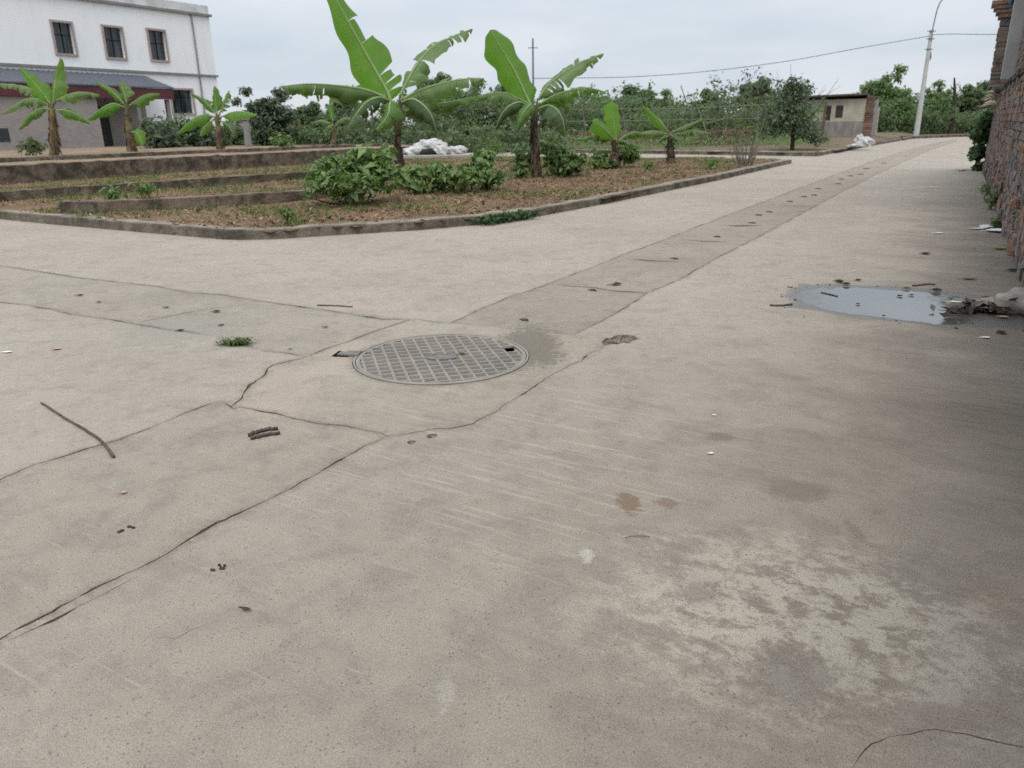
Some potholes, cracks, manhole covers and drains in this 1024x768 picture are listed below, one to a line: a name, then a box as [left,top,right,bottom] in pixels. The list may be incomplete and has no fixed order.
crack [853,729,1023,767]
pothole [602,335,638,346]
crack [0,266,602,641]
manhole cover [332,334,529,385]
